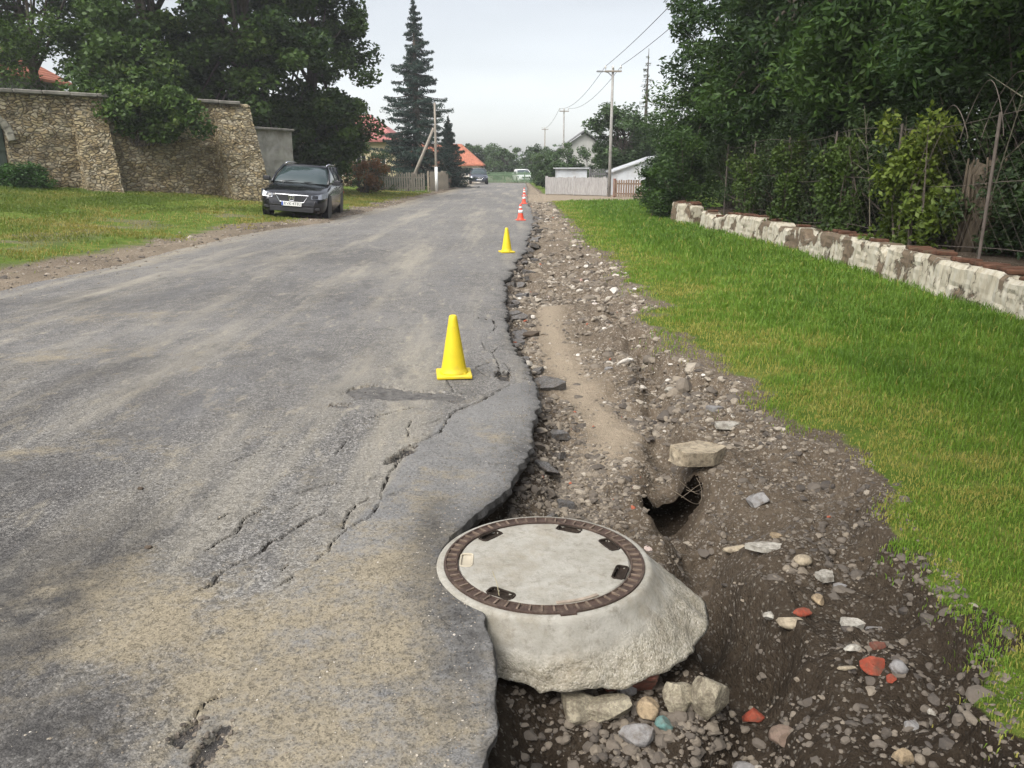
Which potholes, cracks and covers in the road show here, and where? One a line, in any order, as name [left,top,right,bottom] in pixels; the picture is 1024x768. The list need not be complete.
crack [205,483,337,588]
pothole [642,475,703,537]
crack [317,317,510,560]
manhole cover [437,516,709,693]
